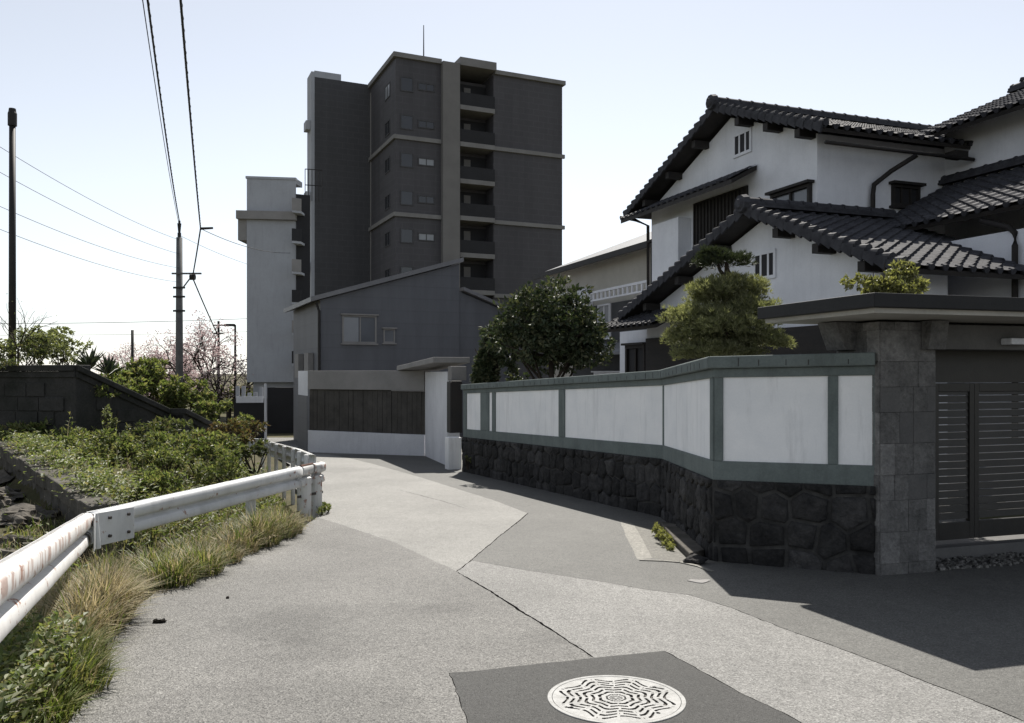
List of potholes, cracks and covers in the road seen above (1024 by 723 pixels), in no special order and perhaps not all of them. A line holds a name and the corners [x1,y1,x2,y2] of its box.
manhole cover [547,675,686,723]
